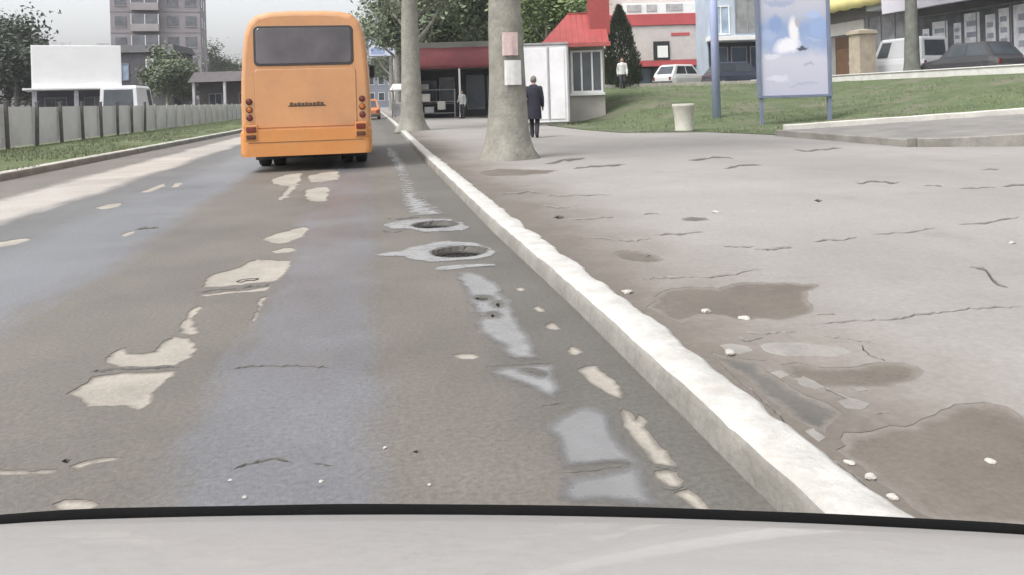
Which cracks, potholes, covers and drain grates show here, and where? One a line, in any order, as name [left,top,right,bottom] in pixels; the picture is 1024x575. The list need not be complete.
crack [969,266,1008,288]
pothole [646,282,820,322]
crack [233,457,294,470]
crack [544,158,627,169]
crack [690,156,760,169]
crack [960,168,1024,189]
pothole [781,362,924,388]
pothole [837,402,1024,524]
crack [644,213,701,236]
